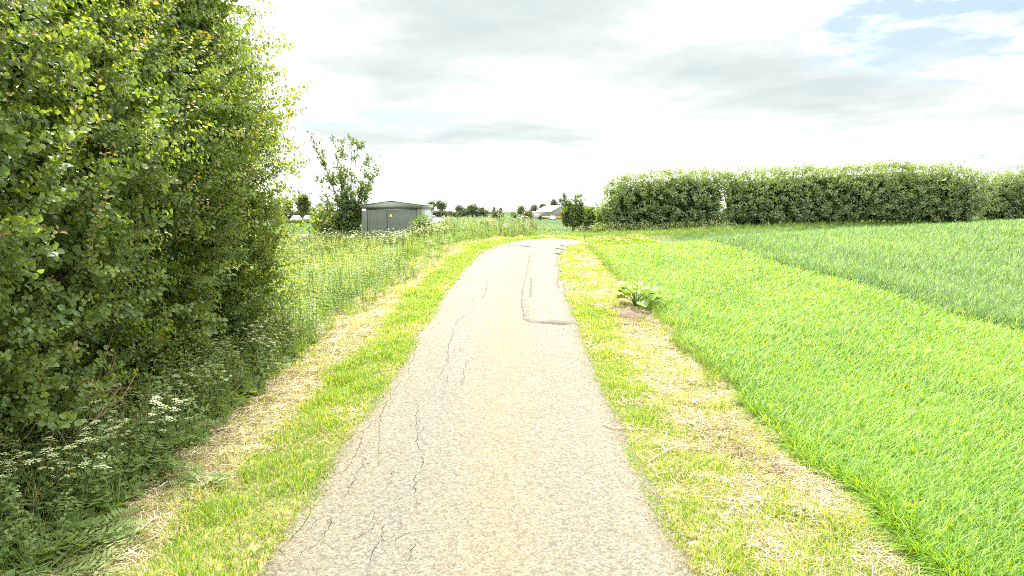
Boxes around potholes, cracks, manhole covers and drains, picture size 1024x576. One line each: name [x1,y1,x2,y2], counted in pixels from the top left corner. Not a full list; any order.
crack [356,402,453,567]
crack [279,329,425,558]
crack [436,278,488,385]
